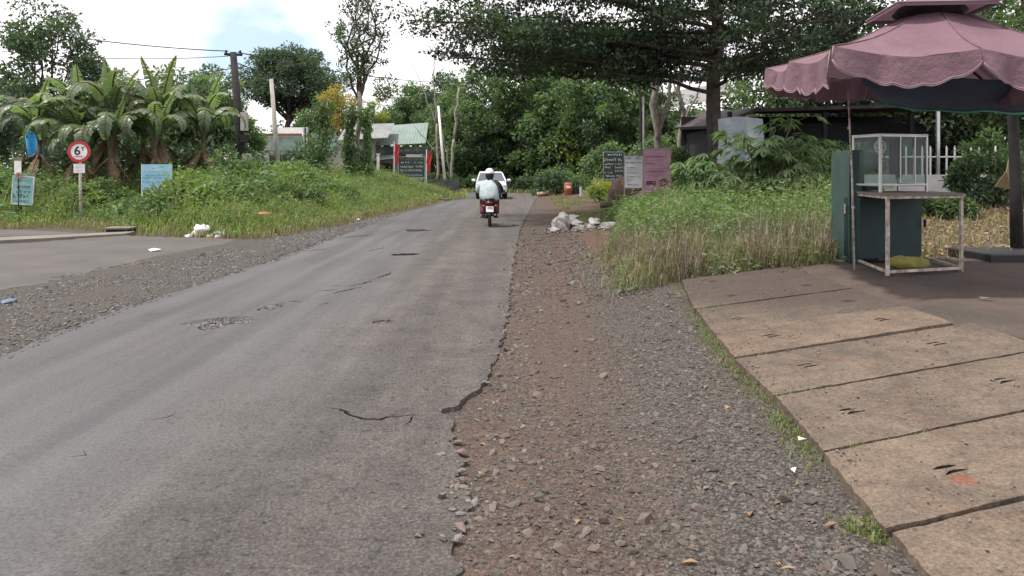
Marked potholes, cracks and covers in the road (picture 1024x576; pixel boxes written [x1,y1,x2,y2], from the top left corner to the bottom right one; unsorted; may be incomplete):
crack [330,407,418,432]
pothole [180,316,258,330]
pothole [257,302,285,311]
crack [319,272,392,305]
